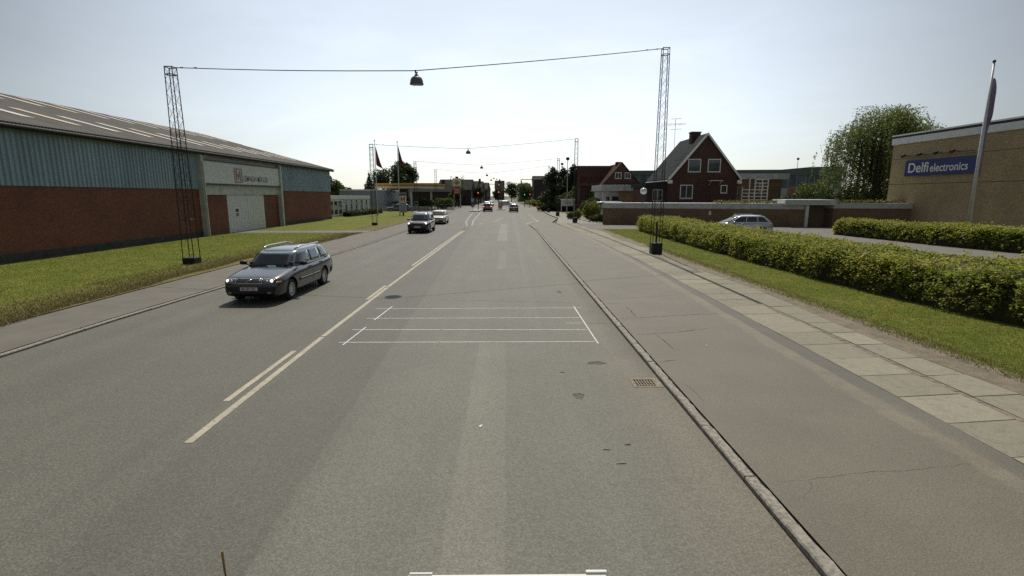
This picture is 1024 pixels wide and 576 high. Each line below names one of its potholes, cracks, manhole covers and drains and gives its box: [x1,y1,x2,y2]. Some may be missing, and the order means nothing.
crack [782,463,977,502]
drain grate [629,378,664,387]
